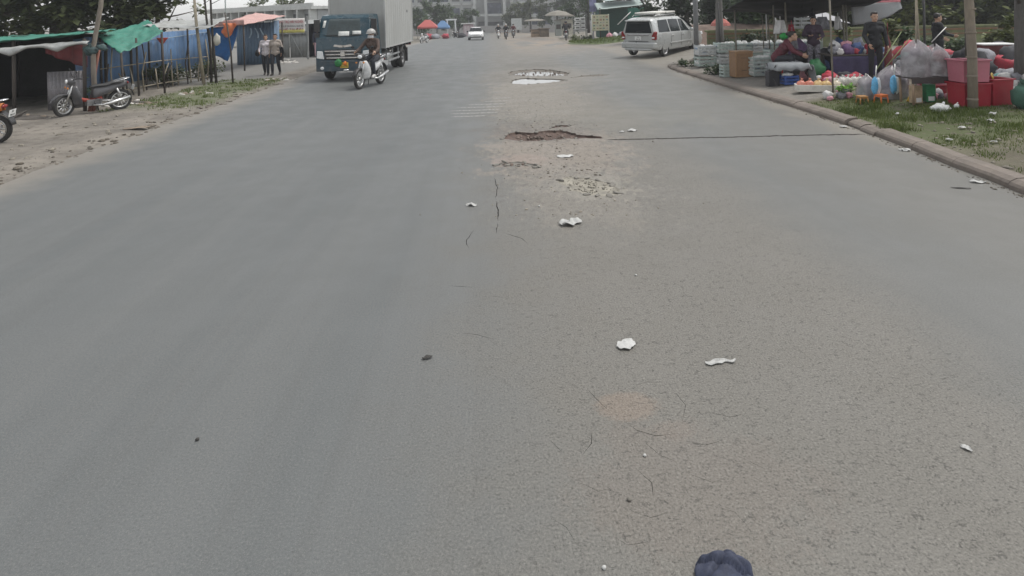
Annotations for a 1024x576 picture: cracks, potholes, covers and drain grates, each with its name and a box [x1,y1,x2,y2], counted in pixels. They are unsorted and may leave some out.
pothole [492,160,541,168]
crack [550,382,758,545]
pothole [500,130,602,142]
crack [466,181,528,245]
pothole [556,176,624,198]
